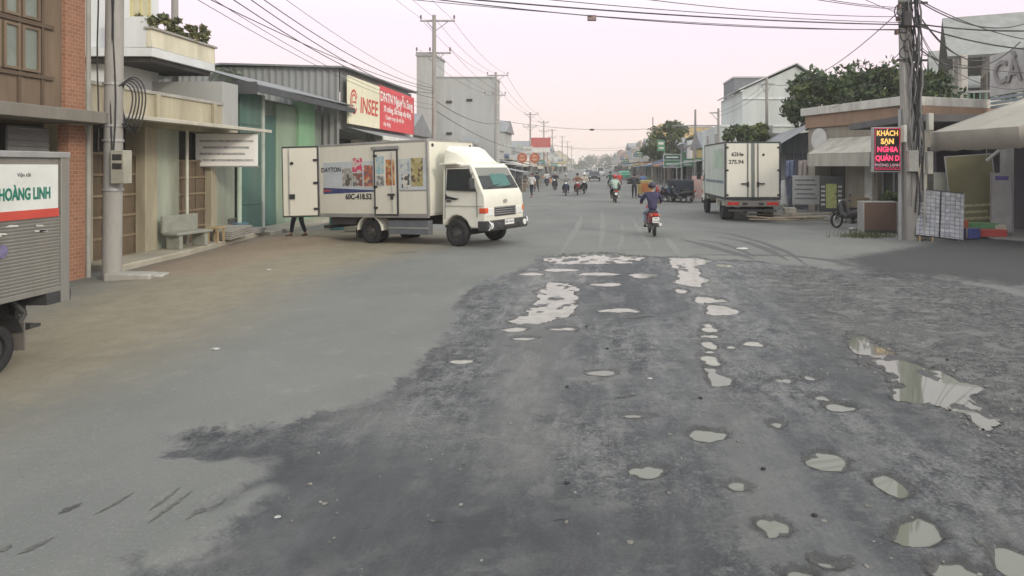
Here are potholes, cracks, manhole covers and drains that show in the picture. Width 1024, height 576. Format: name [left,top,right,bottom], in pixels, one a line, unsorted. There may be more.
pothole [866,469,916,501]
pothole [686,426,730,443]
pothole [844,330,1004,434]
pothole [802,449,852,472]
pothole [582,369,619,377]
pothole [985,541,1024,576]
pothole [820,400,860,412]
pothole [752,515,794,539]
pothole [668,256,715,288]
pothole [718,478,754,492]
pothole [627,461,672,480]
pothole [700,365,736,387]
